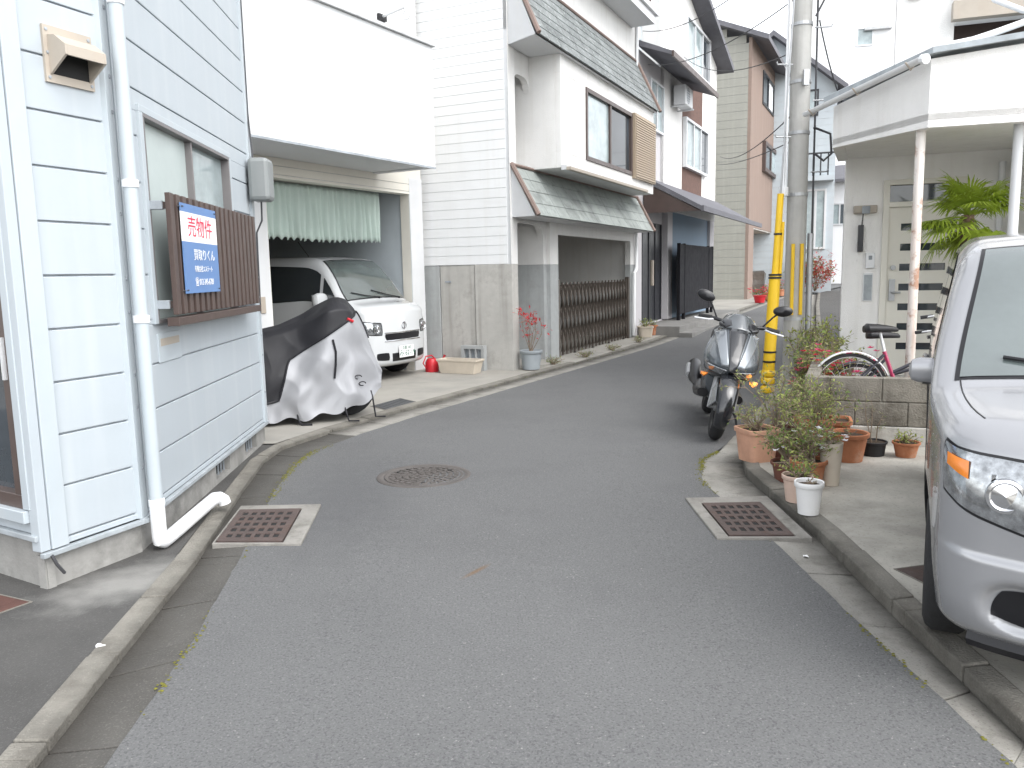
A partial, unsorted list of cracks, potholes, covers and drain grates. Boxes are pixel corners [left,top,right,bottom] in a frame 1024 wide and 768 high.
manhole cover [376,464,471,488]
